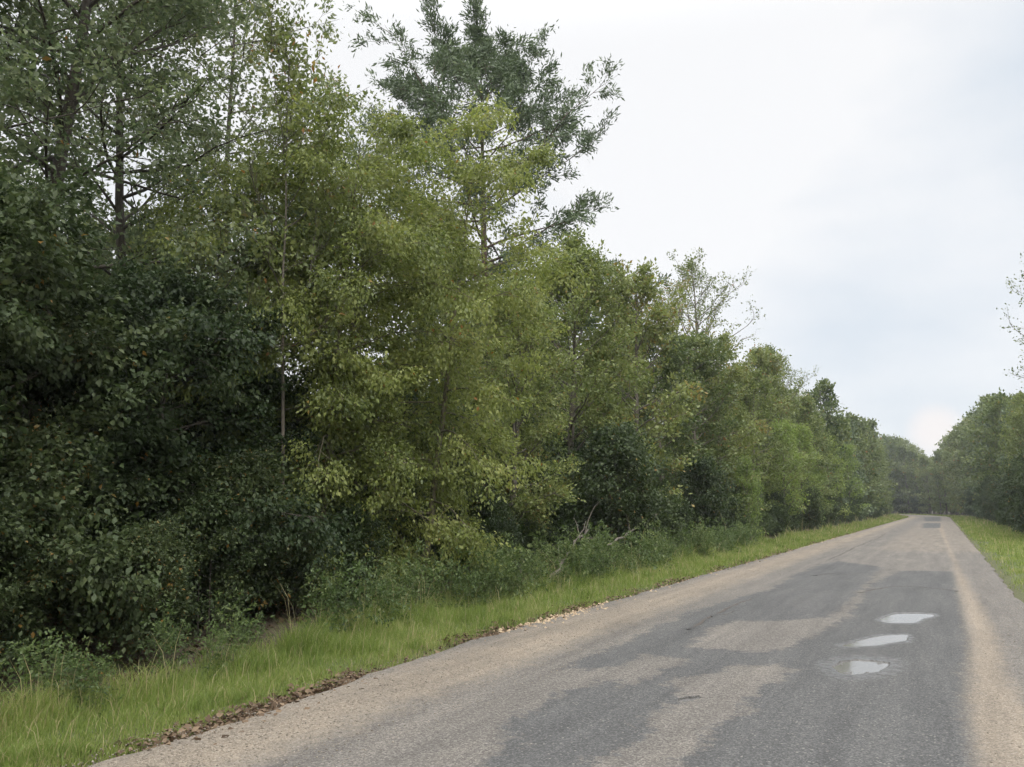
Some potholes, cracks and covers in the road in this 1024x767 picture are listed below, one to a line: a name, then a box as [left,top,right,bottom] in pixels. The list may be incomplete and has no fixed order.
pothole [872,612,942,624]
pothole [822,657,900,677]
pothole [834,633,917,648]
